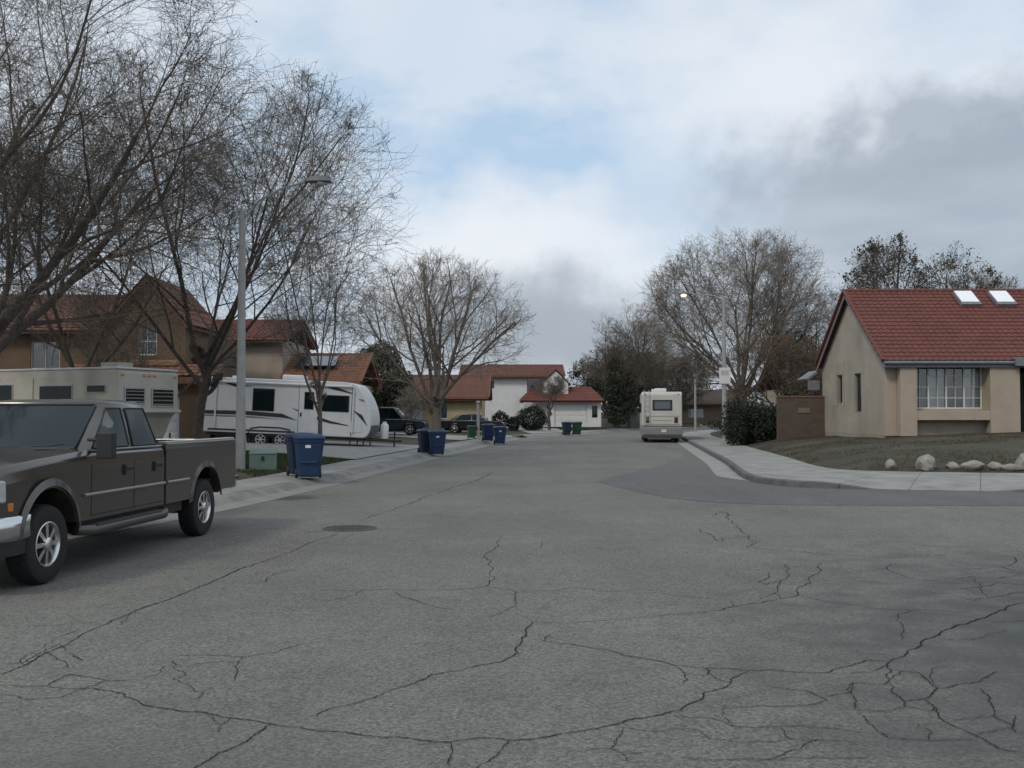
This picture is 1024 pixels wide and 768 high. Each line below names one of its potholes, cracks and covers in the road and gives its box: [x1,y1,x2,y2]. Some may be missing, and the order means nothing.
crack [47,538,1023,768]
crack [679,512,1019,600]
